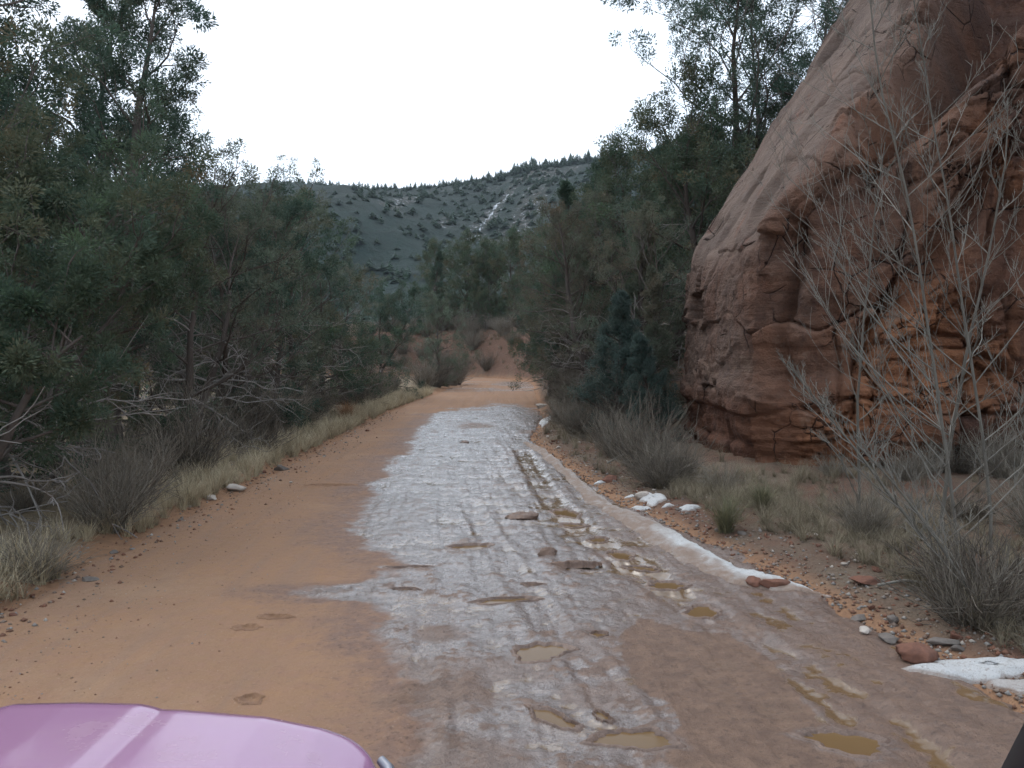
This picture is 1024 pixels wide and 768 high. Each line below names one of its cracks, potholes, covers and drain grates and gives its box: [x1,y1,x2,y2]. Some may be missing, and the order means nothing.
pothole [229,623,264,631]
pothole [788,726,897,760]
pothole [466,595,545,605]
pothole [579,726,687,752]
pothole [645,580,693,592]
pothole [592,708,615,725]
pothole [444,542,495,550]
pothole [523,703,585,733]
pothole [680,603,723,620]
pothole [604,550,636,562]
pothole [588,630,609,638]
